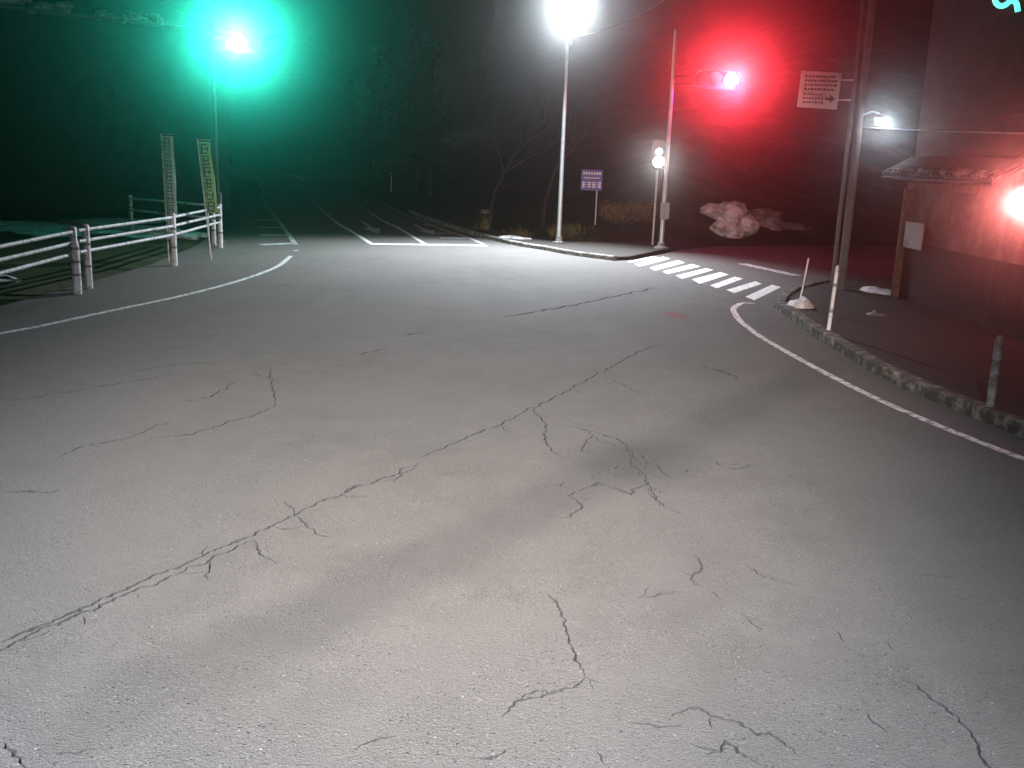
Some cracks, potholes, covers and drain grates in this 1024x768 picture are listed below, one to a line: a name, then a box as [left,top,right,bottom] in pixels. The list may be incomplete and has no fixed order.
crack [501,595,602,717]
crack [639,555,720,599]
crack [545,422,761,519]
crack [0,741,27,768]
crack [864,679,992,768]
crack [626,706,796,766]
crack [505,287,654,317]
crack [0,344,664,651]
